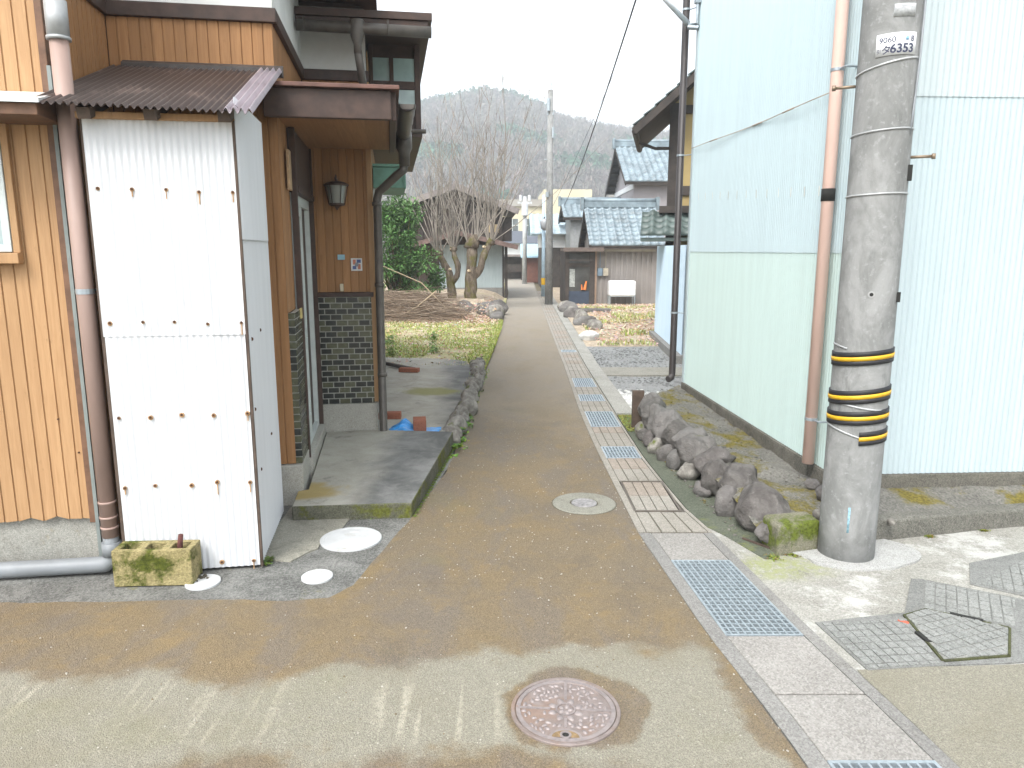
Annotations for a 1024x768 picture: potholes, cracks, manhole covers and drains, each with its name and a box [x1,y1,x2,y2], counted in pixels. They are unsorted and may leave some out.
manhole cover [185,574,221,591]
drain grate [671,560,804,636]
drain grate [601,446,641,459]
manhole cover [301,569,333,584]
drain grate [572,378,597,387]
manhole cover [320,527,382,552]
manhole cover [511,678,621,747]
manhole cover [551,493,617,515]
drain grate [585,411,621,427]
drain grate [827,760,942,768]
